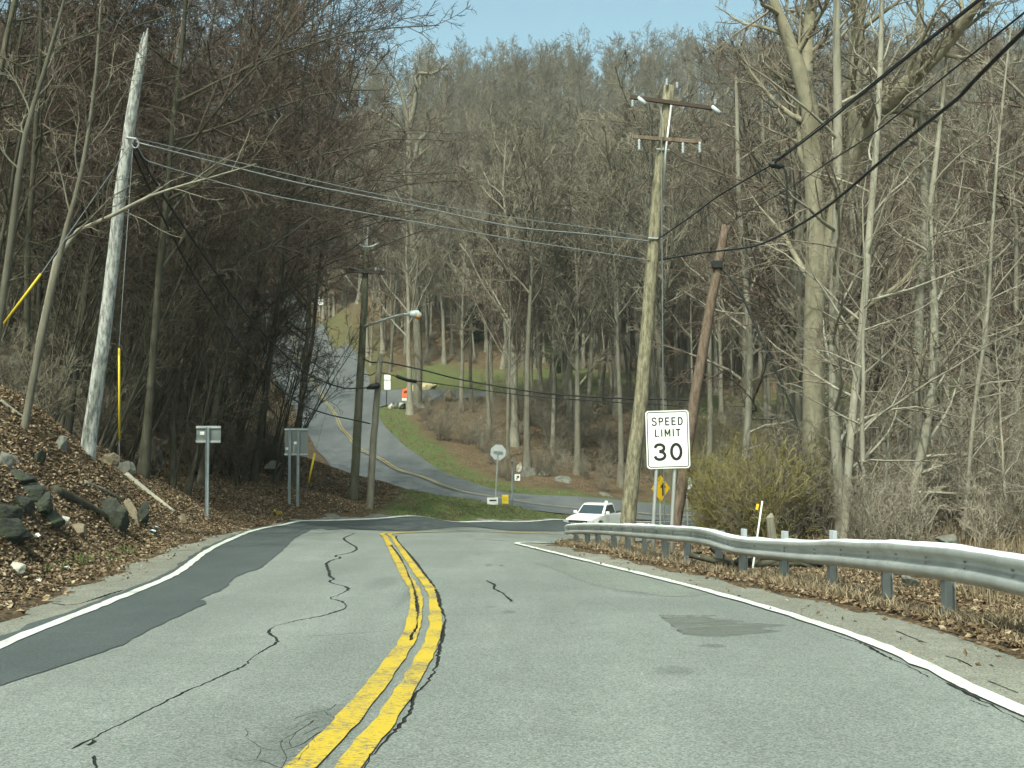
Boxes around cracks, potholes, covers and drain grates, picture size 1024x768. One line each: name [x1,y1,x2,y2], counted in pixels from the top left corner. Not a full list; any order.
crack [53,590,122,605]
crack [827,631,1024,723]
crack [72,533,447,768]
crack [486,565,513,602]
